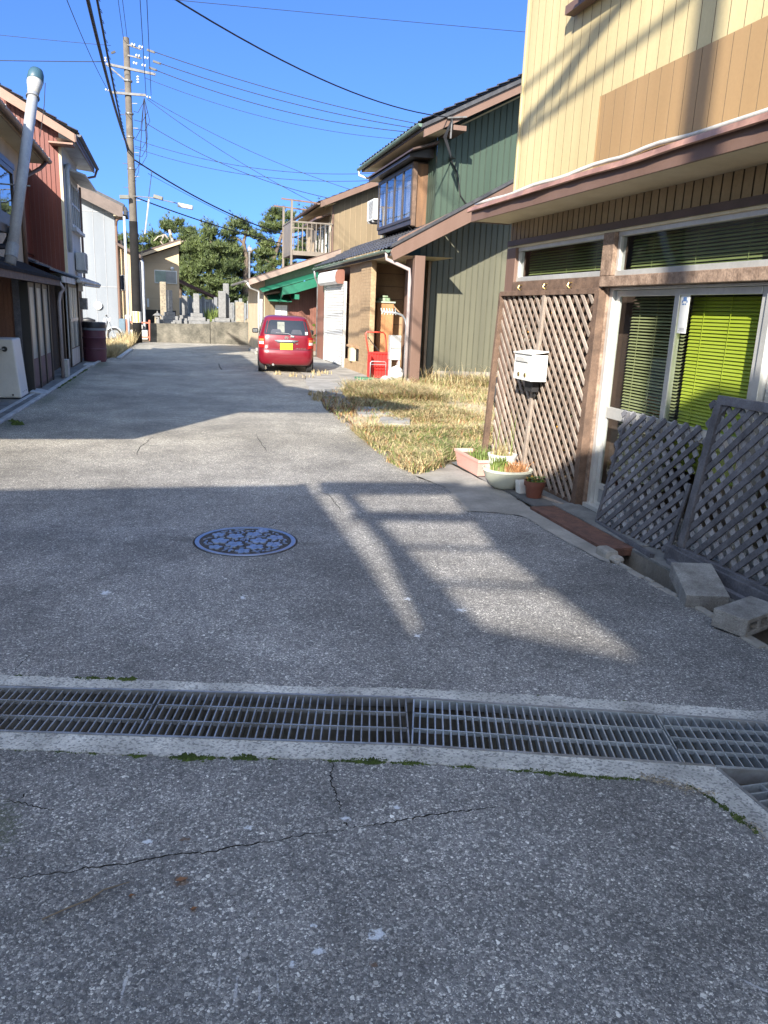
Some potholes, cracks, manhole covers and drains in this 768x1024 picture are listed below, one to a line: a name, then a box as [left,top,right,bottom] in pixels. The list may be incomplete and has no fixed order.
drain grate [411,699,682,762]
drain grate [0,685,161,734]
drain grate [140,691,410,743]
drain grate [742,782,768,808]
crack [6,762,498,879]
manhole cover [192,527,298,557]
drain grate [656,715,768,770]
